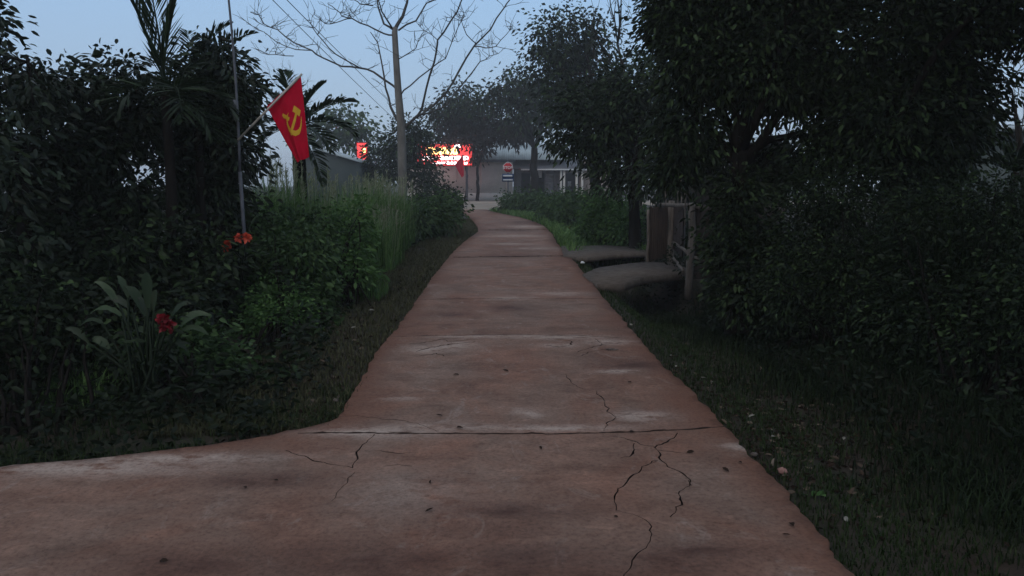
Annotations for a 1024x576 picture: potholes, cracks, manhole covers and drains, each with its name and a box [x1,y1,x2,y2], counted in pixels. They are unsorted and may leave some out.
crack [402,326,469,356]
crack [549,339,632,357]
crack [614,433,692,576]
crack [285,415,436,500]
crack [566,375,628,428]
